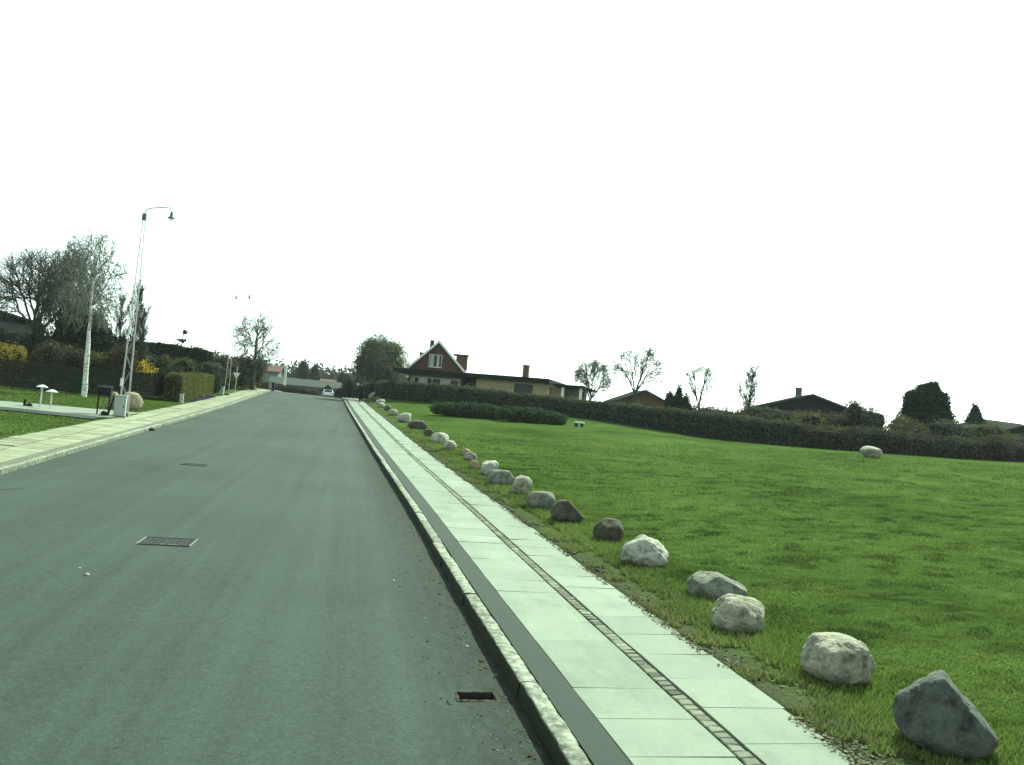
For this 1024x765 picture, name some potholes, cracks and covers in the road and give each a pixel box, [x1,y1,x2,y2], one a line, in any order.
drain grate [455,691,500,702]
